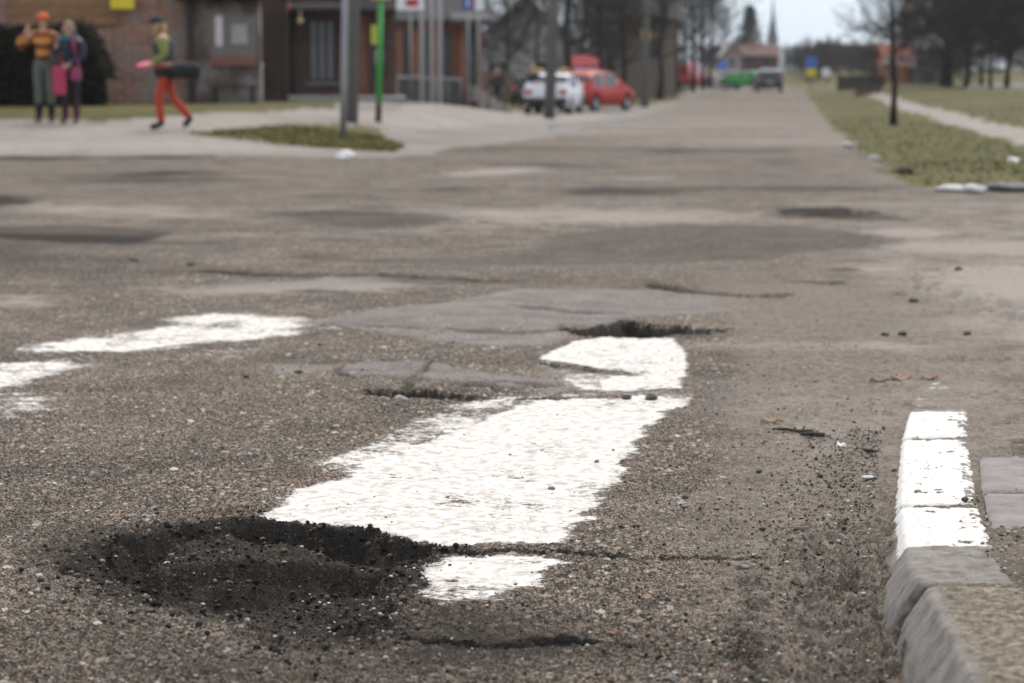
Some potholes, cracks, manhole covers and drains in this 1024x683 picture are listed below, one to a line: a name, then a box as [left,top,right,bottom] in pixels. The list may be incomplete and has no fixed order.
pothole [363,388,482,402]
crack [405,638,636,649]
pothole [60,515,445,651]
pothole [562,321,733,339]
crack [448,547,785,564]
